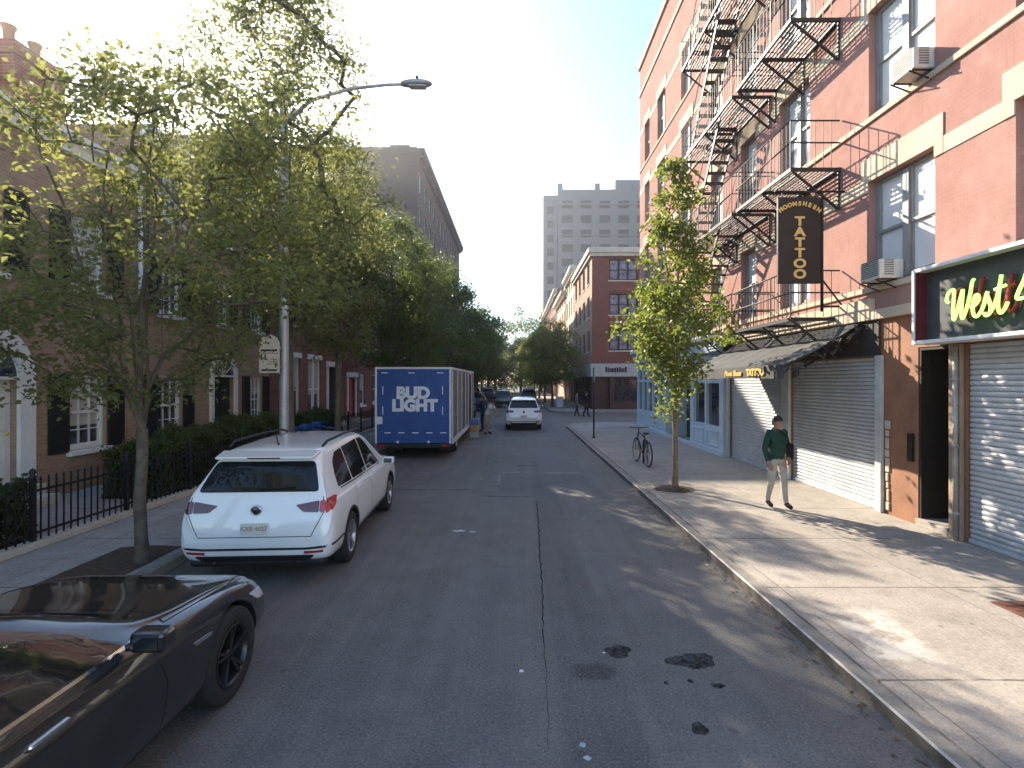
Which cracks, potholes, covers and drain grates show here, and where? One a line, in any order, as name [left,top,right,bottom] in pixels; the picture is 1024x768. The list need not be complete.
crack [496,496,549,749]
pothole [664,653,715,669]
pothole [691,721,709,736]
pothole [604,644,632,658]
